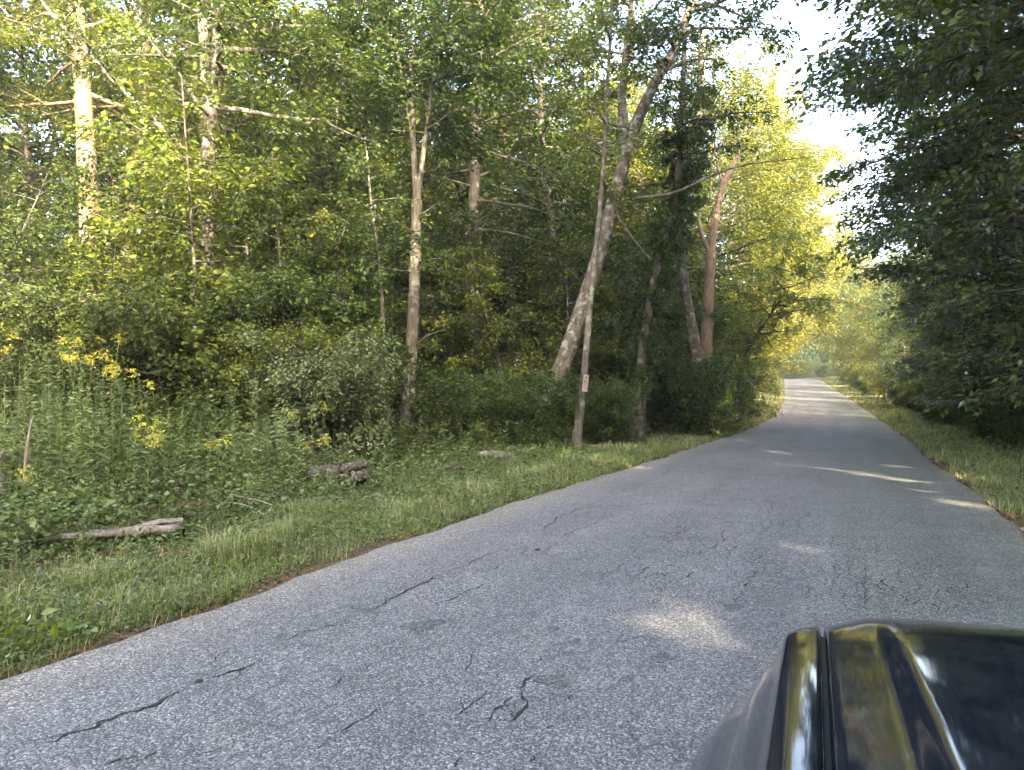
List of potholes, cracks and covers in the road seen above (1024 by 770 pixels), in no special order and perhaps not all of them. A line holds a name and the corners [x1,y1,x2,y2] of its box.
crack [311,709,379,751]
crack [561,514,768,602]
crack [810,535,989,610]
crack [0,654,260,747]
crack [447,657,542,727]
crack [266,550,503,644]
crack [535,508,621,551]
